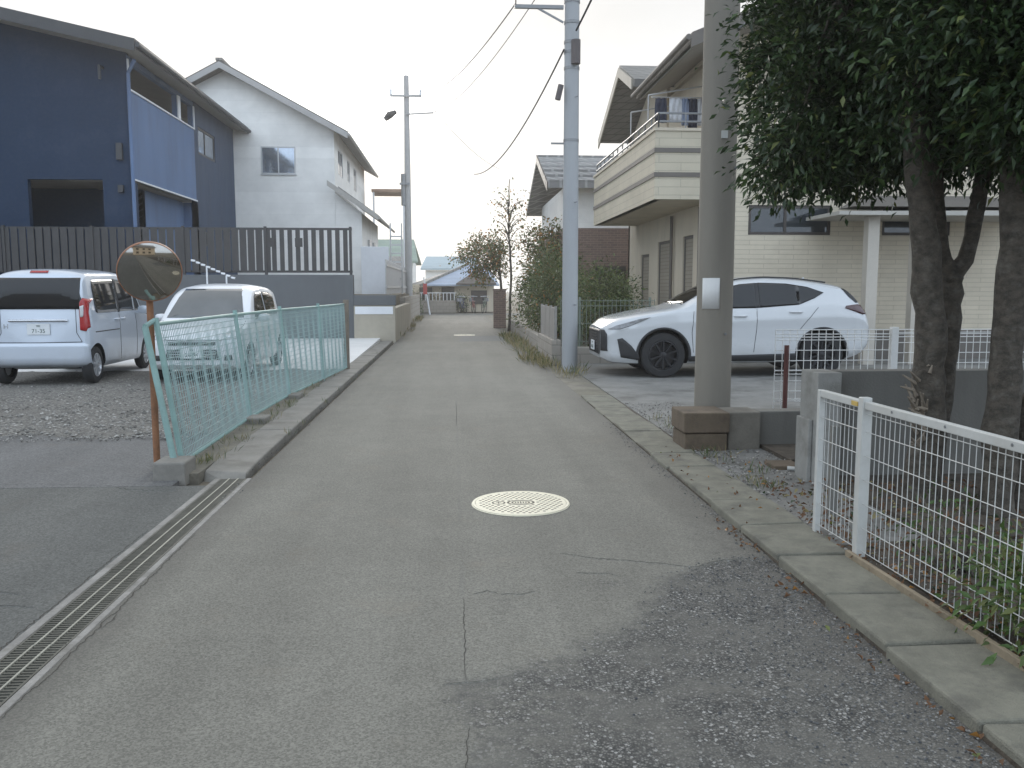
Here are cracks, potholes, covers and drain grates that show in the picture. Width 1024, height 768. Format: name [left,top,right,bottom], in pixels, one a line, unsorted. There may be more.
crack [561,553,760,576]
manhole cover [472,491,570,516]
